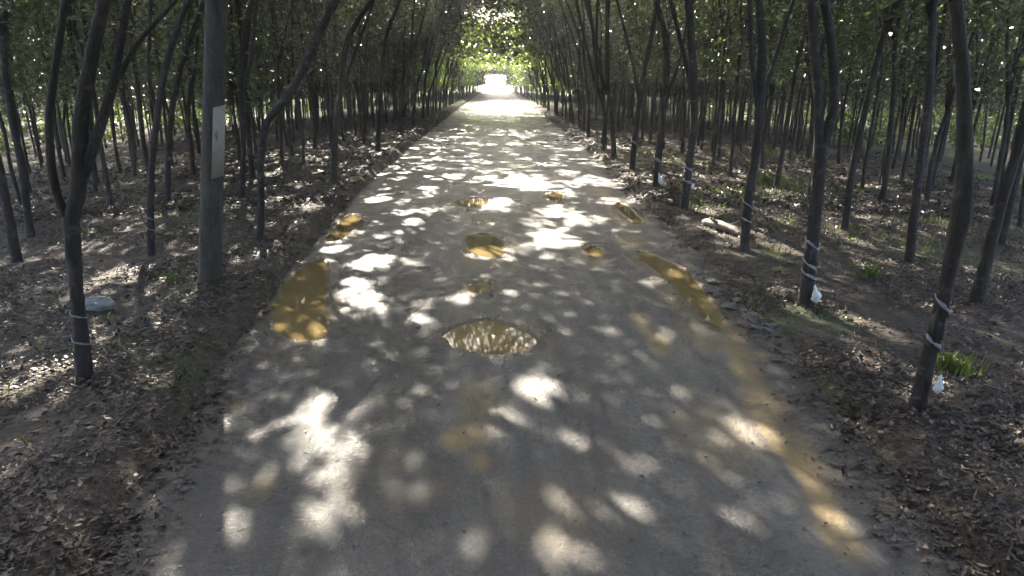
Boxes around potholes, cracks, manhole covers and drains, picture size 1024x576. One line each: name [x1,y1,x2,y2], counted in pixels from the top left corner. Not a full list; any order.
pothole [458,232,513,260]
pothole [458,279,502,297]
pothole [318,213,367,243]
pothole [258,256,344,345]
pothole [543,191,569,202]
pothole [612,202,649,225]
pothole [576,243,611,260]
pothole [629,249,735,331]
pothole [430,316,547,359]
pothole [452,197,494,208]
